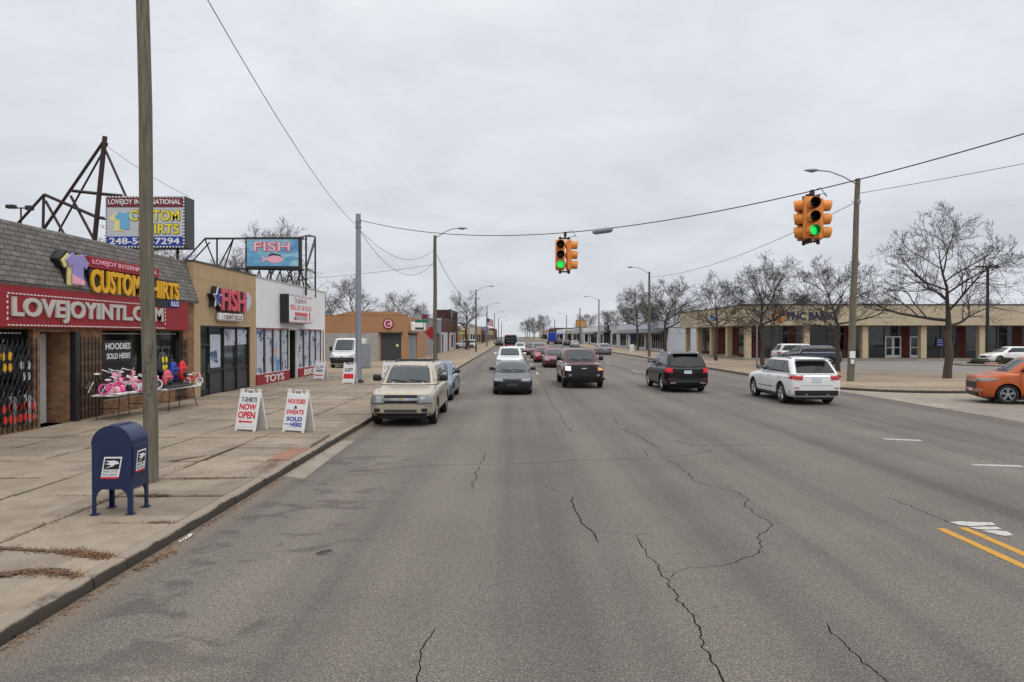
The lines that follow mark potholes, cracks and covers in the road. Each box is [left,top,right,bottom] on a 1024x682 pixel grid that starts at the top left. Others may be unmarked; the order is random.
crack [416,627,437,682]
crack [353,454,615,489]
crack [550,488,598,542]
crack [599,441,773,682]
crack [826,623,888,682]
